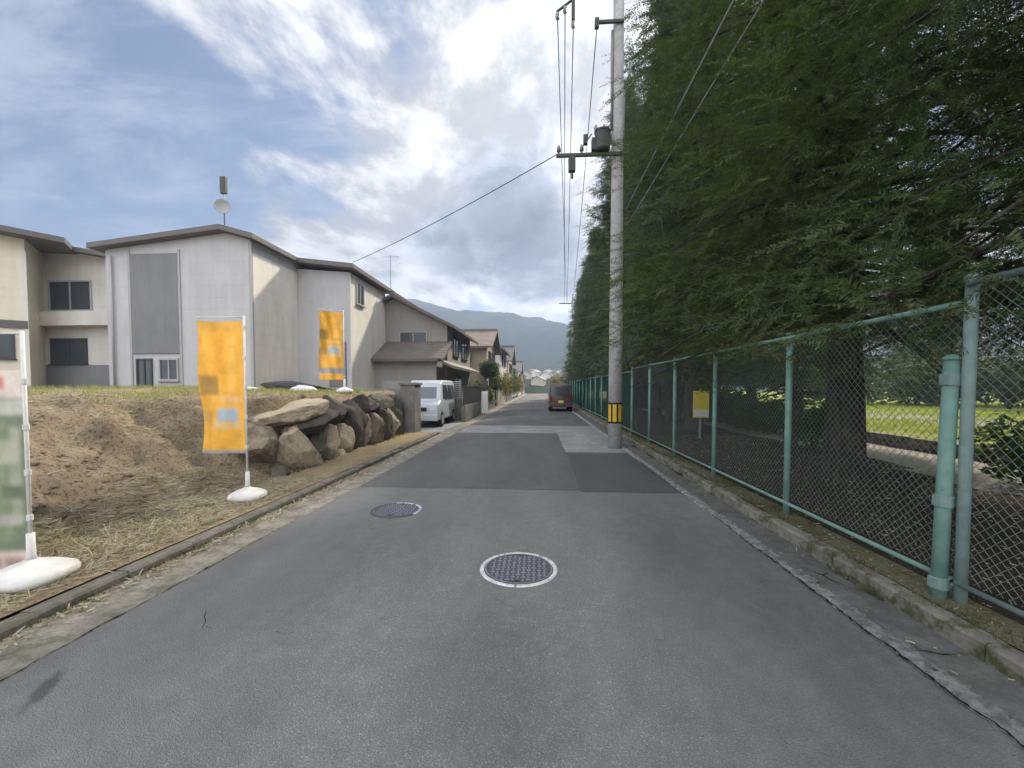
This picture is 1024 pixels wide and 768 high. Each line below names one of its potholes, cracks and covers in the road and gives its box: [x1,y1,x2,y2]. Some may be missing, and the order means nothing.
manhole cover [370,502,422,518]
manhole cover [480,552,558,588]
